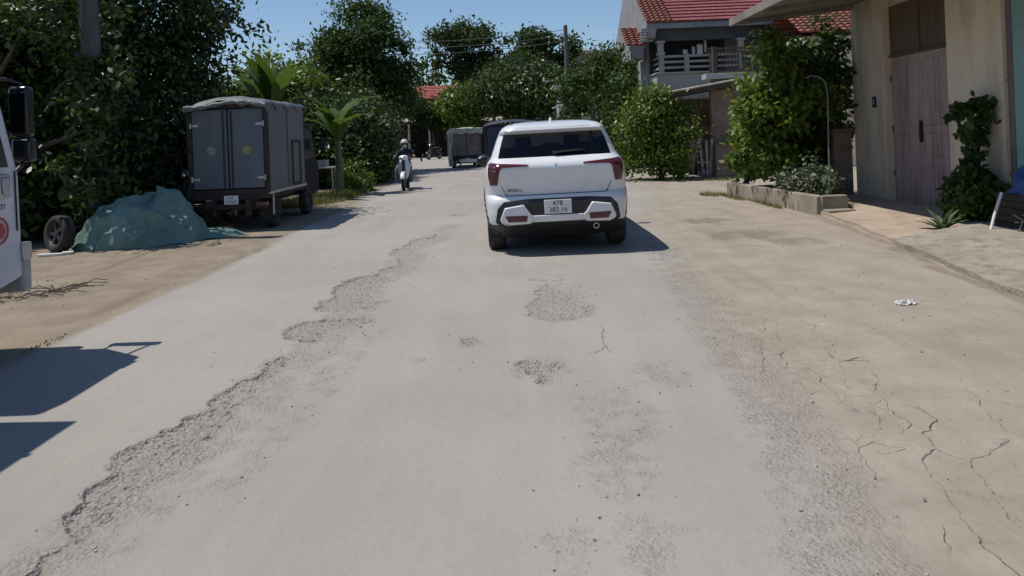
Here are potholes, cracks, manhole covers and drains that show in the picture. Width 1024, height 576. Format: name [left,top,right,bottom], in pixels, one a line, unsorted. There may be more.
pothole [377,234,454,273]
pothole [312,274,396,312]
pothole [522,278,599,322]
pothole [512,359,566,384]
pothole [279,316,385,344]
pothole [25,352,297,576]
pothole [461,337,480,345]
crack [751,313,1024,576]
